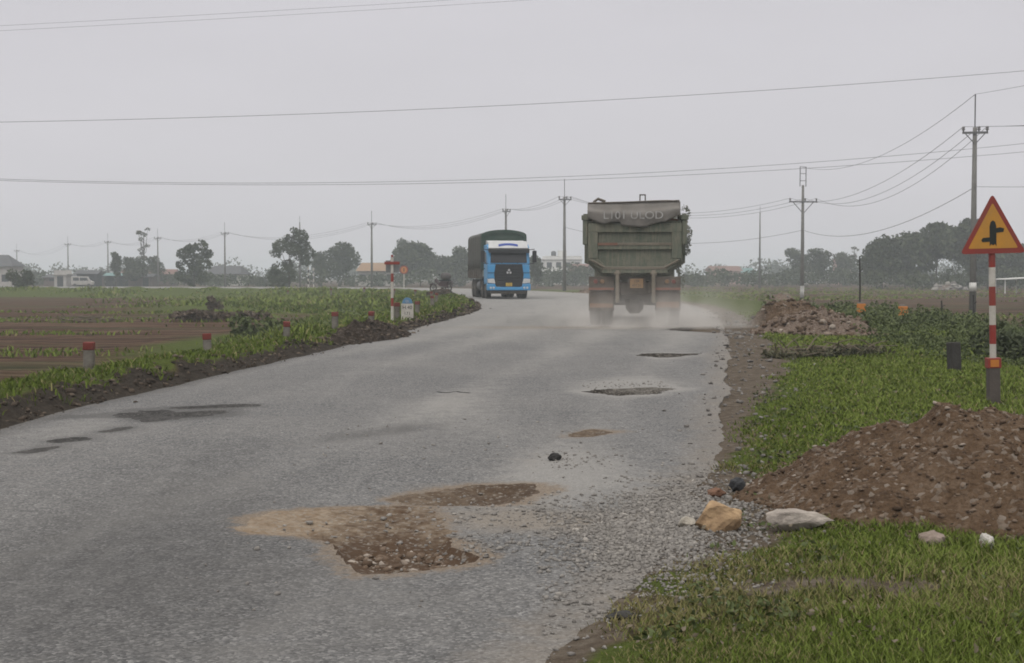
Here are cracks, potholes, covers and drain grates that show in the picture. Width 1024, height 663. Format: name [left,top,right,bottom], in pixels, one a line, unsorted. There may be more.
pothole [386,483,540,506]
pothole [581,387,673,396]
pothole [568,429,613,437]
pothole [234,506,479,574]
